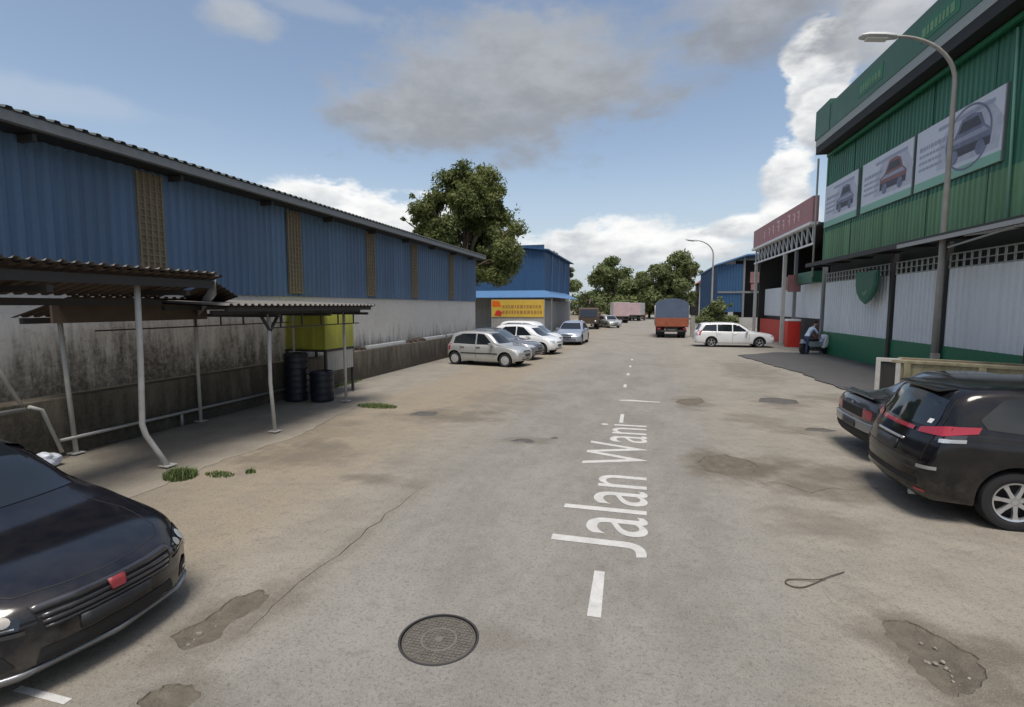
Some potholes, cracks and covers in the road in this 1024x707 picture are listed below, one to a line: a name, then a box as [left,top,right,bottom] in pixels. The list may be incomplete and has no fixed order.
crack [251,486,424,628]
pothole [170,589,270,651]
pothole [136,683,201,707]
manhole cover [398,614,479,666]
pothole [882,620,988,697]
